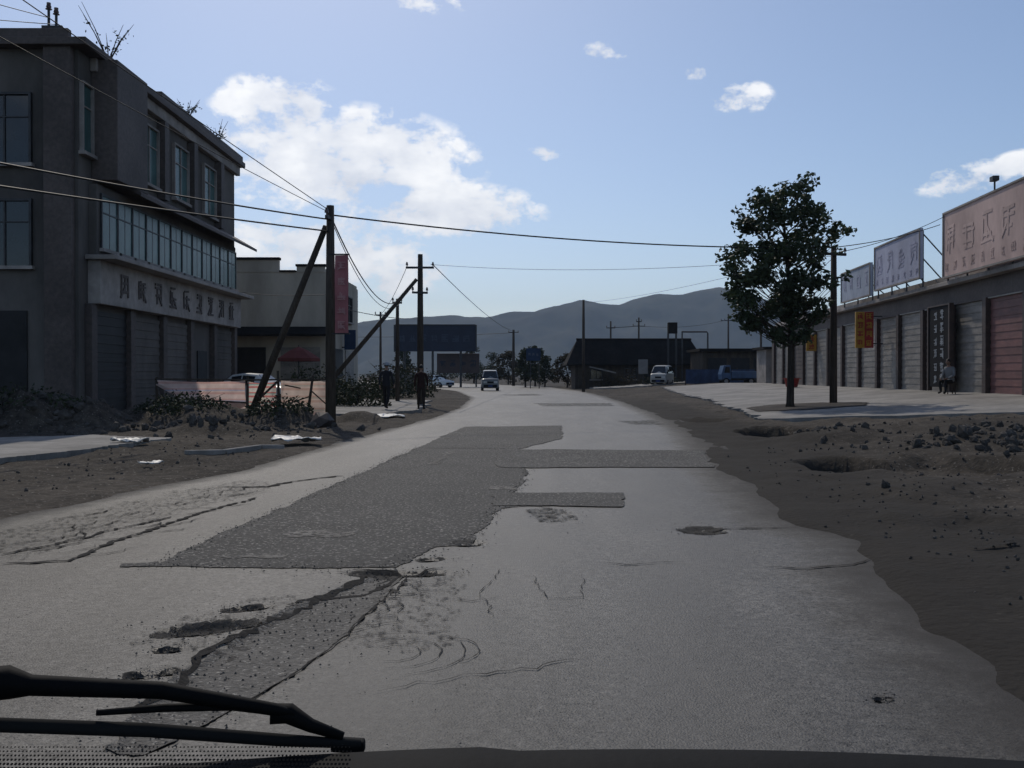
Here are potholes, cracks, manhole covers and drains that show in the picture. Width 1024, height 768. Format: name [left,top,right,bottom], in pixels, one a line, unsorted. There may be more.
pothole [149,618,260,639]
pothole [676,526,727,535]
crack [1,475,343,564]
pothole [152,646,181,654]
crack [135,566,574,706]
pothole [220,604,271,613]
crack [773,559,868,569]
pothole [527,507,578,521]
